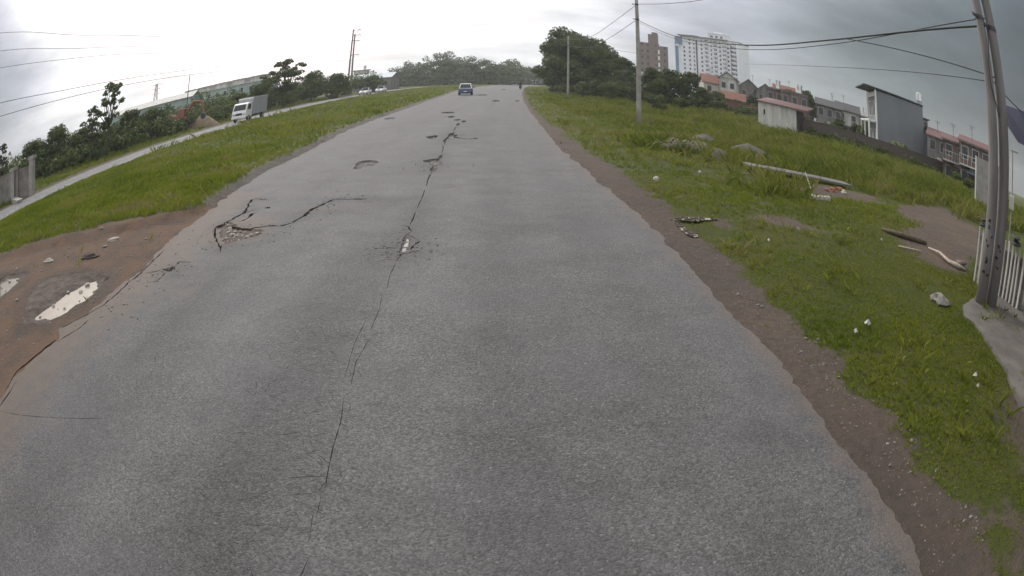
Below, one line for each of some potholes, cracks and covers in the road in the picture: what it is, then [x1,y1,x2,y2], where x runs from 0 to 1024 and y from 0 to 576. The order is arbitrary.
pothole [353,160,379,170]
crack [42,127,477,576]
pothole [216,222,263,244]
pothole [423,154,443,173]
pothole [397,232,411,260]
